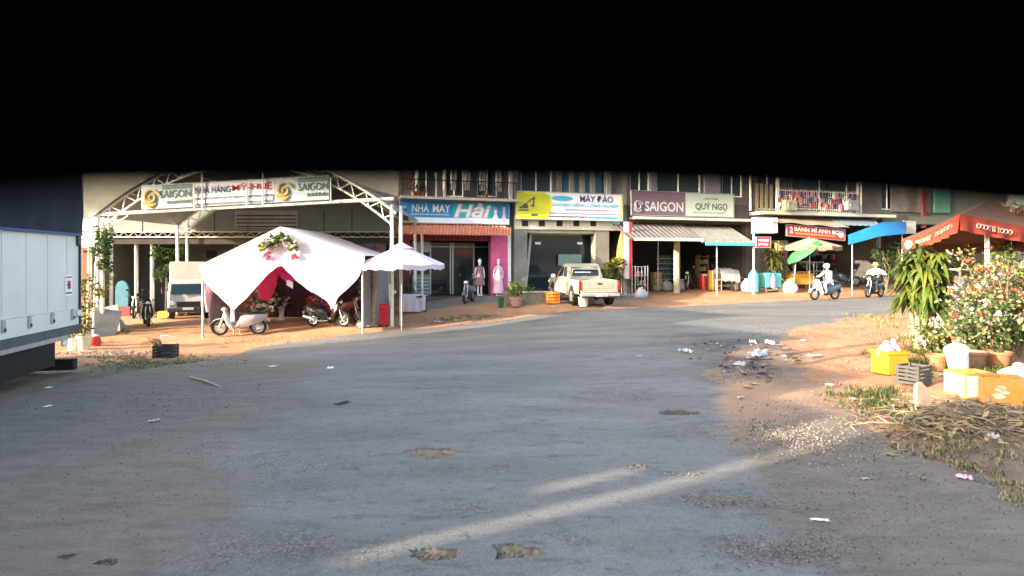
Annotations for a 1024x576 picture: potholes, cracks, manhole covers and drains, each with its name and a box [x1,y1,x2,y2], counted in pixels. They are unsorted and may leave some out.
pothole [385,442,478,466]
pothole [378,534,497,576]
pothole [19,541,112,575]
pothole [642,406,719,420]
pothole [56,545,155,576]
pothole [457,531,570,574]
